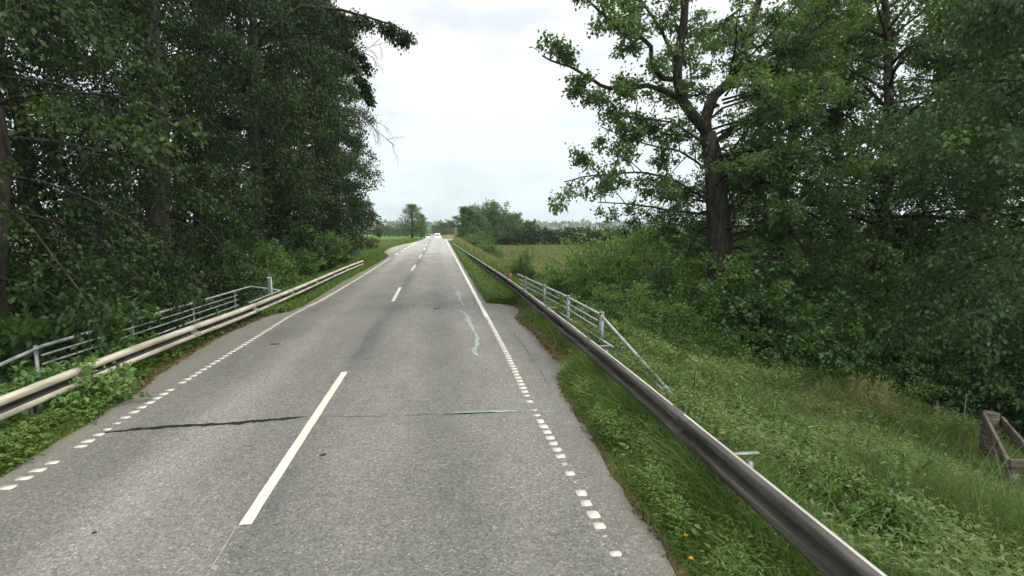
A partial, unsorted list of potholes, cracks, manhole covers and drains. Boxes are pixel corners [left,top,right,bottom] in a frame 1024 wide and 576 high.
crack [103,409,555,433]
crack [454,286,481,357]
